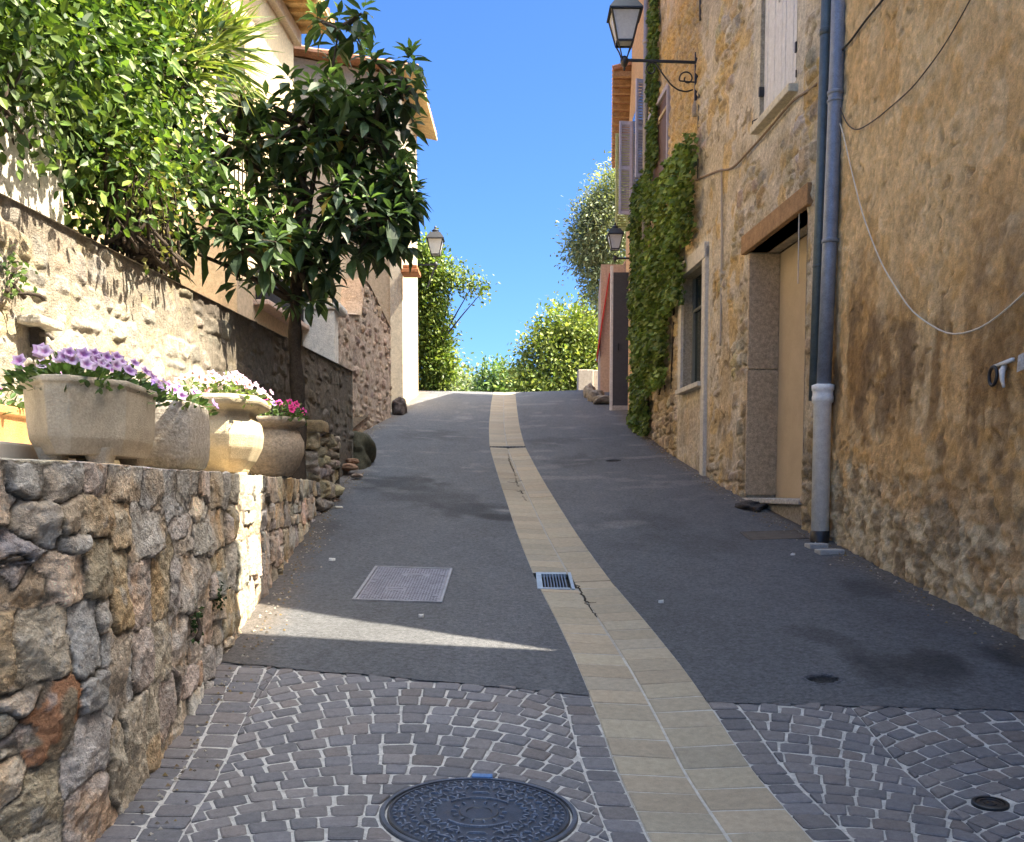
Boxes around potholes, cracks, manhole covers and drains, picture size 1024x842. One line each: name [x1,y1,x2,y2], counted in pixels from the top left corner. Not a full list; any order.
manhole cover [379,773,578,842]
manhole cover [740,530,809,540]
manhole cover [352,566,453,604]
drain grate [536,572,575,590]
manhole cover [971,796,1010,812]
crack [576,585,597,617]
